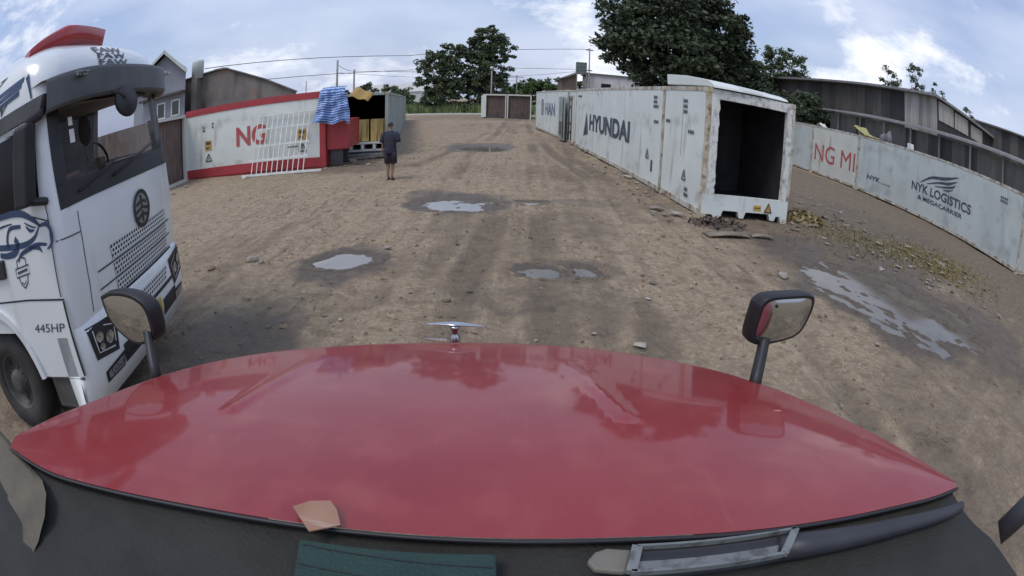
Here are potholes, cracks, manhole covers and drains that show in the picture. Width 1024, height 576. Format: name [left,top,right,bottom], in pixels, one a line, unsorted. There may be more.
pothole [393,193,527,214]
pothole [557,261,609,283]
pothole [501,262,581,282]
pothole [293,247,391,273]
pothole [773,252,1004,371]
pothole [440,145,518,153]
